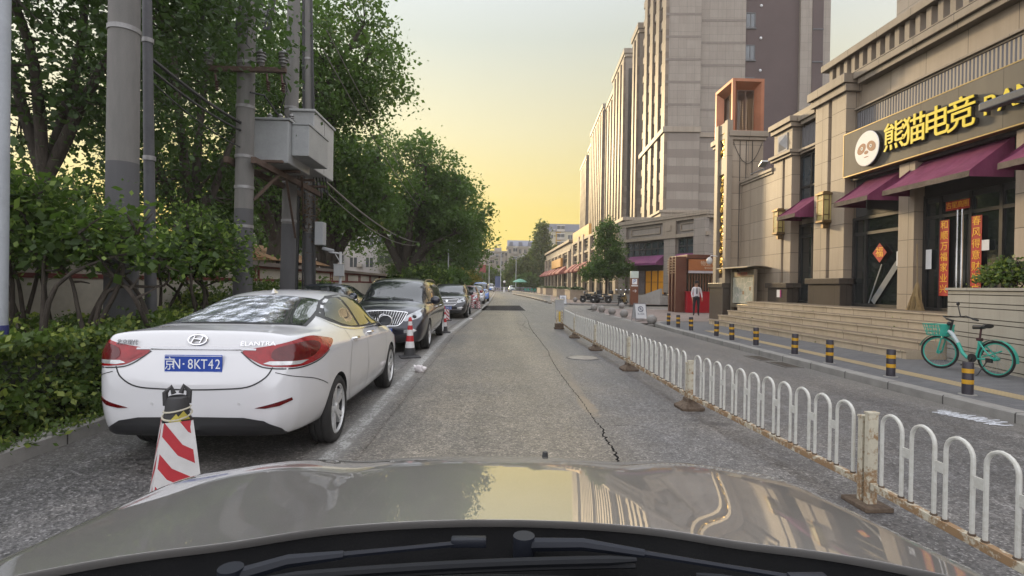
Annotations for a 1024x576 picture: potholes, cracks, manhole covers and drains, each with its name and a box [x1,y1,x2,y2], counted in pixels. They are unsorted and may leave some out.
crack [521,313,646,462]
